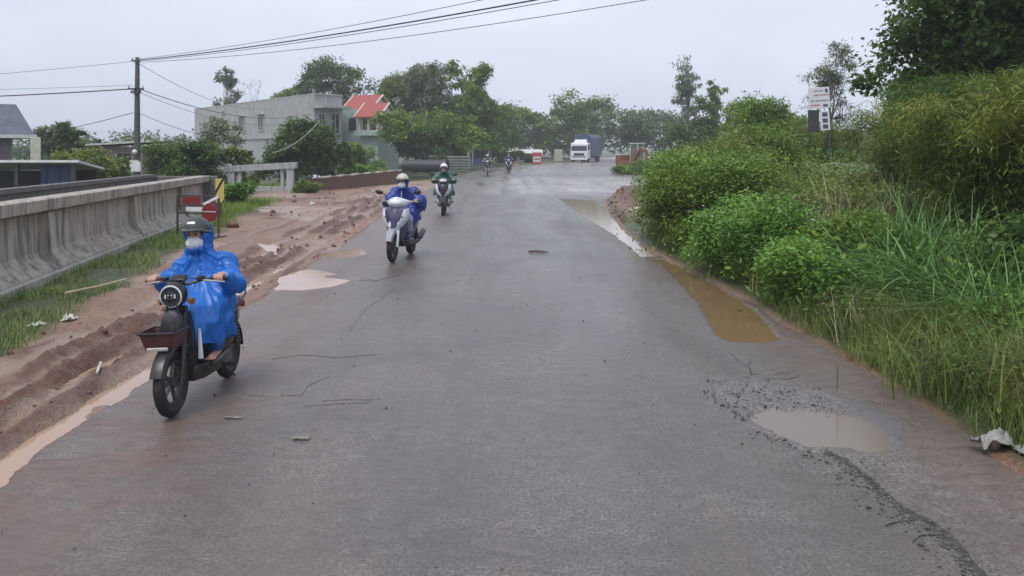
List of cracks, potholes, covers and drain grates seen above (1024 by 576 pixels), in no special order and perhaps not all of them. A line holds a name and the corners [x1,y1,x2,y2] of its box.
crack [248,376,374,407]
pothole [700,377,927,460]
